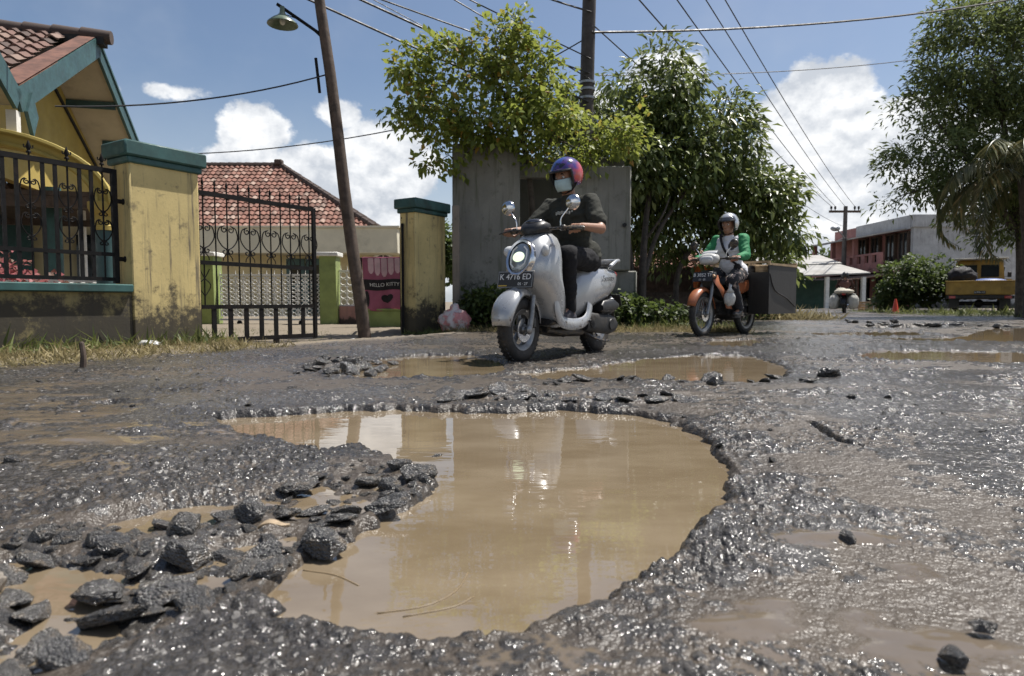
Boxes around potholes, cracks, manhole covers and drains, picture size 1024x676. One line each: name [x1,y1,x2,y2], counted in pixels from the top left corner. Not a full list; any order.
pothole [76,396,143,406]
crack [804,419,875,448]
pothole [870,326,1024,342]
pothole [844,346,1024,364]
pothole [310,350,522,379]
pothole [0,399,765,676]
pothole [506,352,803,384]
